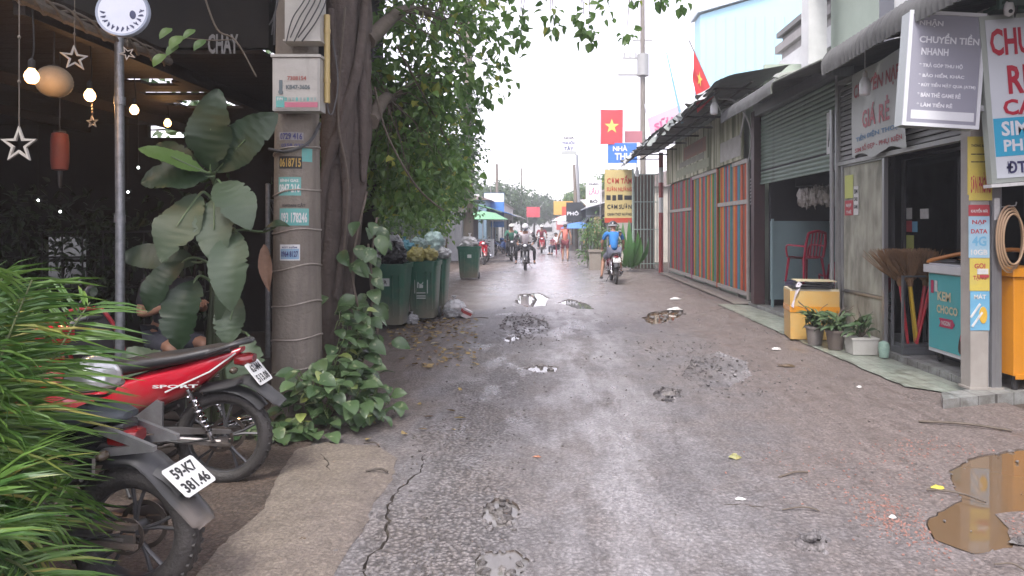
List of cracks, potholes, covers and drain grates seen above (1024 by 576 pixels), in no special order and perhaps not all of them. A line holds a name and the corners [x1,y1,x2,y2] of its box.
pothole [926,449,1024,554]
pothole [792,529,831,554]
pothole [498,315,549,335]
pothole [558,299,594,309]
pothole [515,292,549,307]
crack [363,450,427,576]
pothole [681,351,752,388]
pothole [523,363,559,373]
pothole [653,386,682,403]
pothole [482,496,524,527]
pothole [642,308,686,325]
pothole [475,548,535,576]
